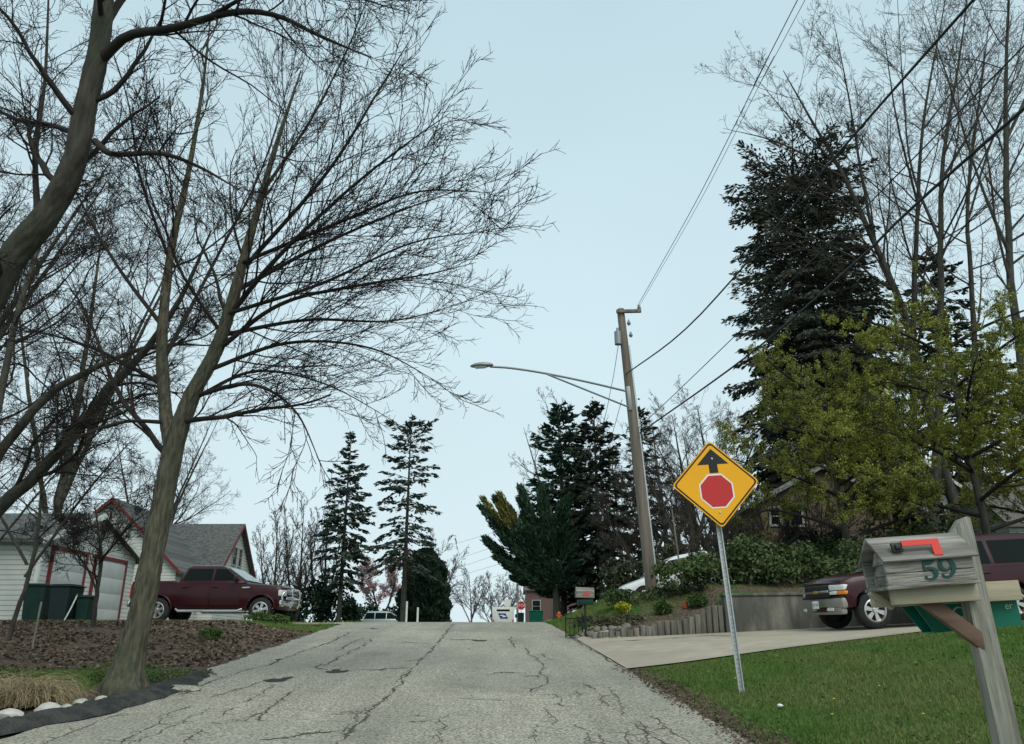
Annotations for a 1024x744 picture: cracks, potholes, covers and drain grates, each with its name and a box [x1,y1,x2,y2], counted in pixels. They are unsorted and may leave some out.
crack [457,630,694,744]
crack [46,632,430,744]
crack [409,714,449,744]
